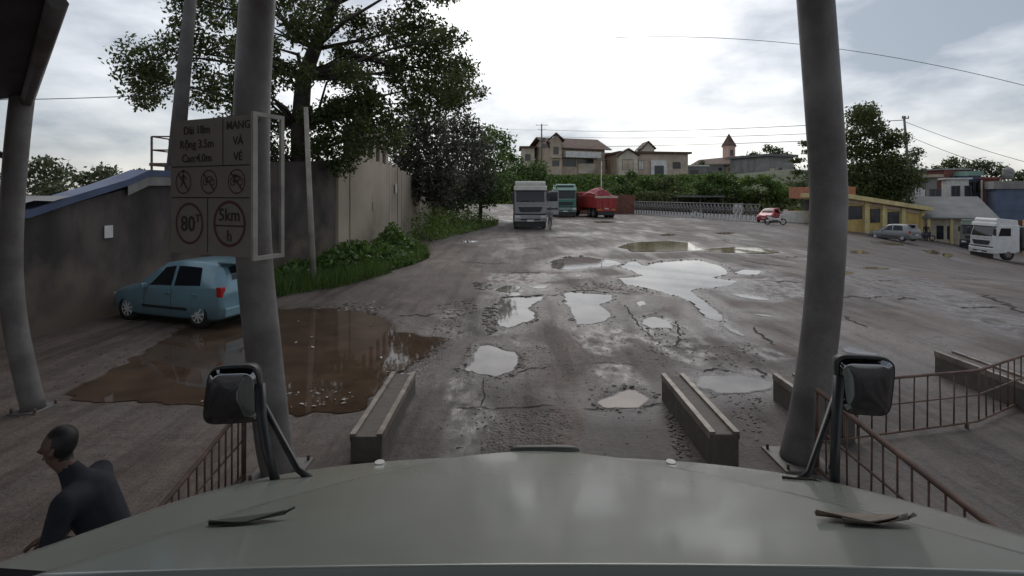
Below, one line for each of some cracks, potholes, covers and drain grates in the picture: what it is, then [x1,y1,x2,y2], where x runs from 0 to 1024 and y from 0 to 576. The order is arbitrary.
pothole [494,295,543,328]
pothole [619,241,702,252]
pothole [453,344,530,379]
pothole [558,291,617,326]
pothole [544,257,624,270]
crack [952,277,1024,313]
crack [460,378,547,409]
pothole [588,383,661,413]
pothole [617,259,737,322]
